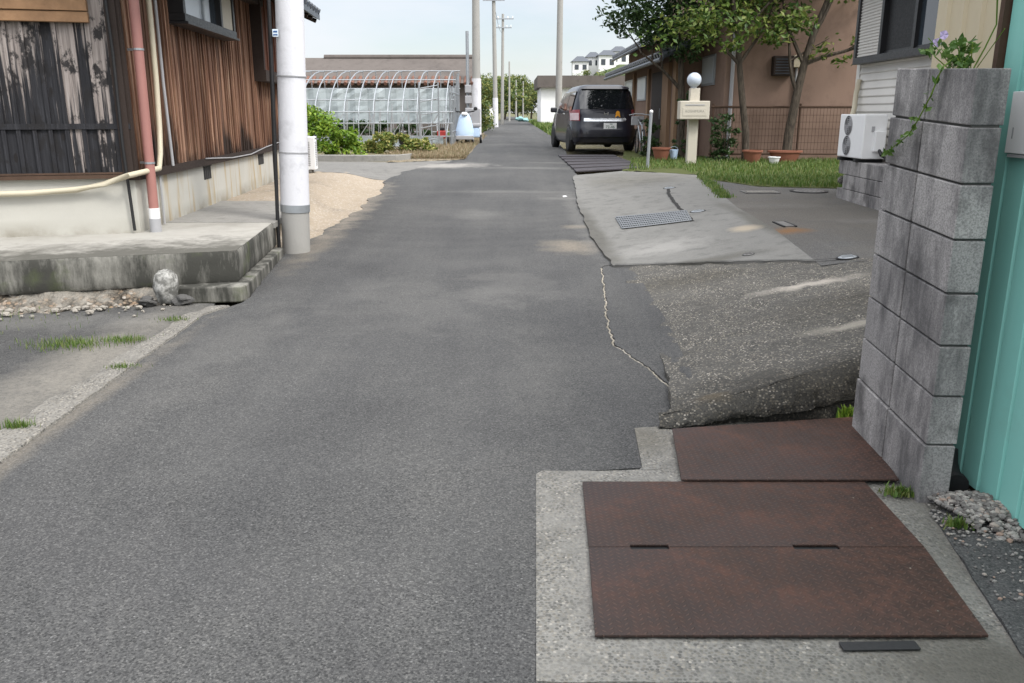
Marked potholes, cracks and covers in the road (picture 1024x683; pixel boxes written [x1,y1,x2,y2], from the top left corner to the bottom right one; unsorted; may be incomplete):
crack [601,268,668,386]
drain grate [615,210,692,229]
